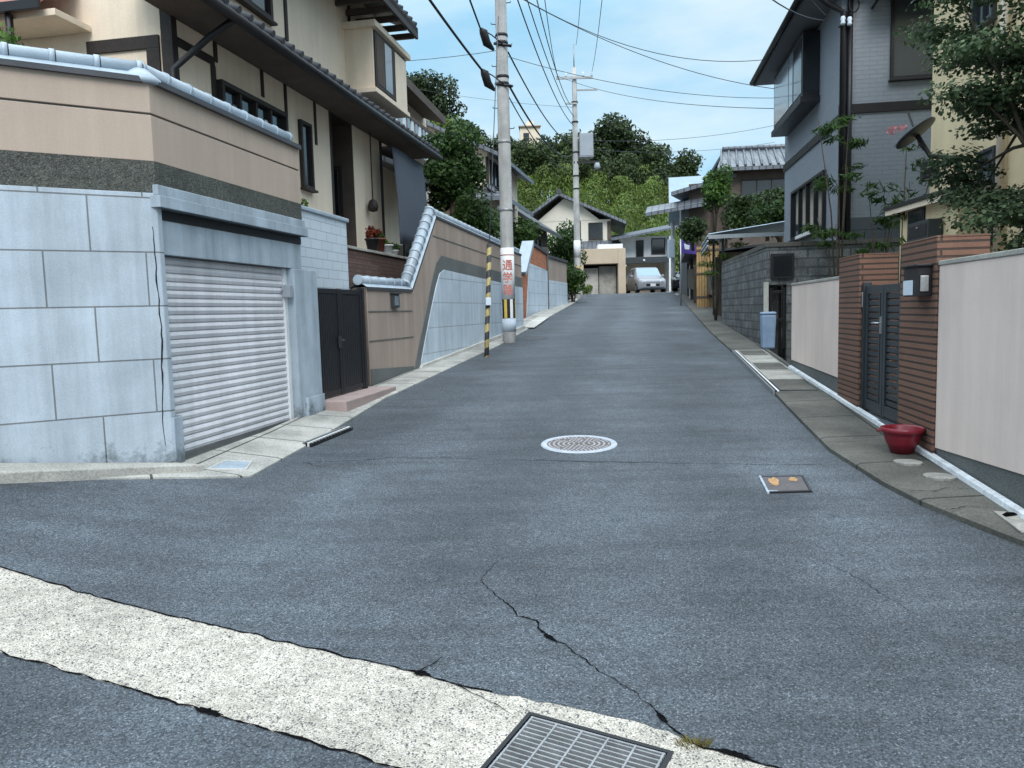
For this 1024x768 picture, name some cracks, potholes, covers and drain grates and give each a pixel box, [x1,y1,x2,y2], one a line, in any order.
utility cover [923,472,957,481]
utility cover [759,475,812,494]
manhole cover [541,435,617,453]
drain grate [302,426,353,447]
utility cover [207,460,253,470]
drain grate [480,711,674,768]
crack [475,564,692,741]
